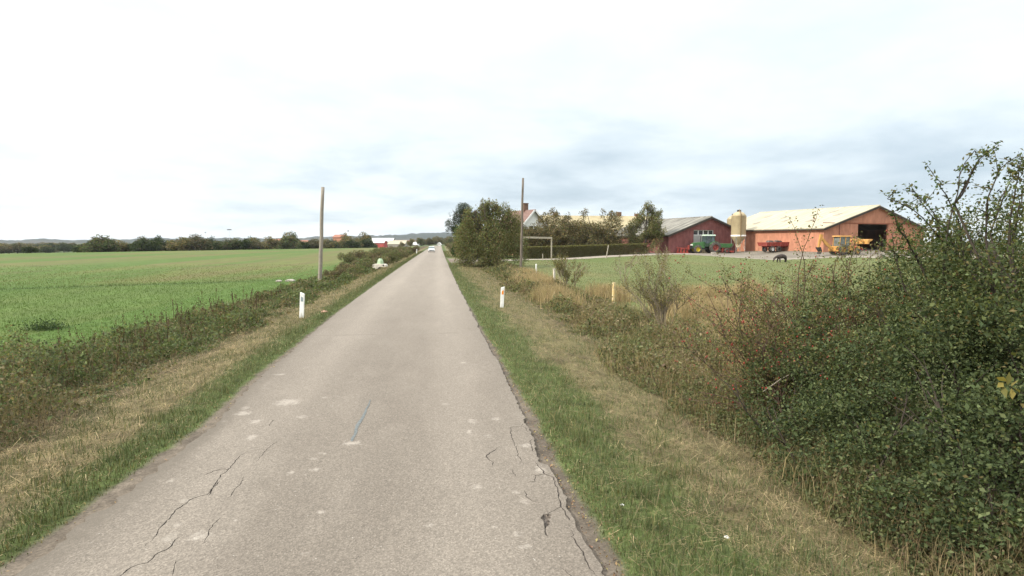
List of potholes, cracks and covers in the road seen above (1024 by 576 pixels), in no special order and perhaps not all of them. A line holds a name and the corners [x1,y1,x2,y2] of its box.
crack [120,424,274,576]
crack [486,421,595,576]
